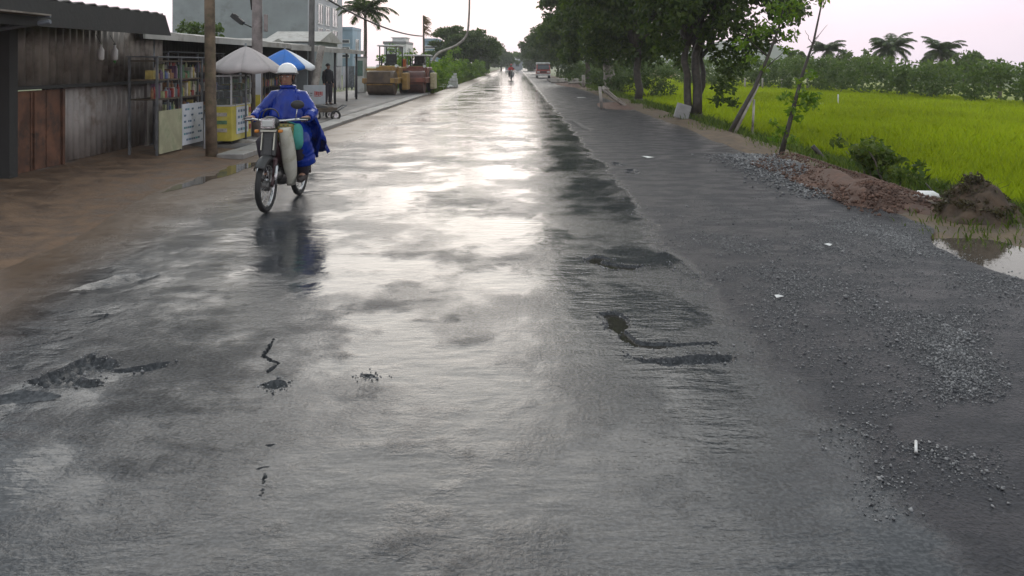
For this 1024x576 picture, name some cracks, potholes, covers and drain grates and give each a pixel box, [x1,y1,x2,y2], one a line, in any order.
pothole [623,350,739,370]
pothole [22,350,178,390]
pothole [581,254,651,271]
crack [256,444,275,497]
pothole [0,390,61,408]
pothole [595,310,736,350]
pothole [257,376,292,394]
crack [261,338,280,375]
